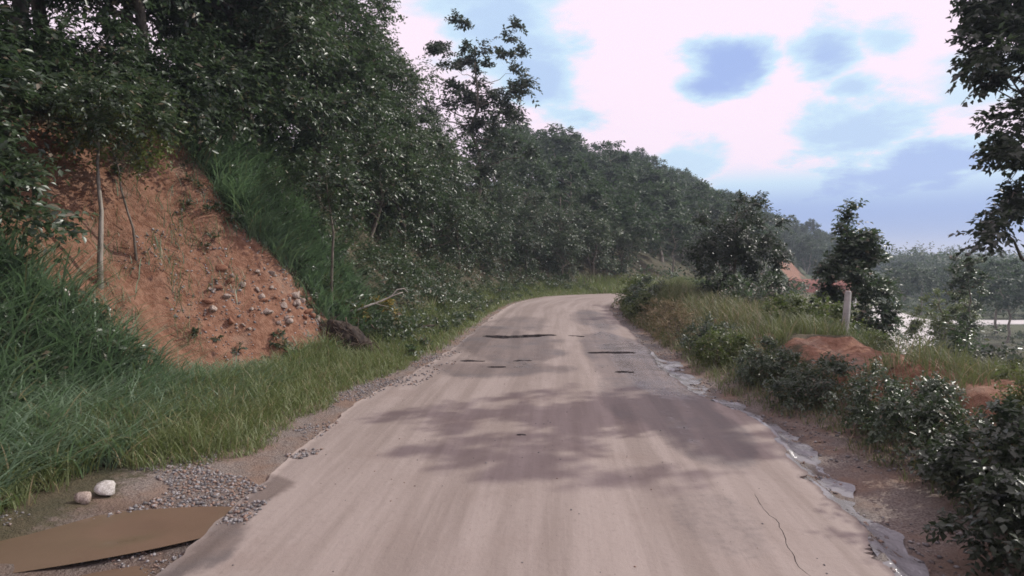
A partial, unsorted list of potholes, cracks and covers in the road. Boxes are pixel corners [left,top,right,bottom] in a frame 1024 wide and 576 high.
crack [755,495,810,576]
